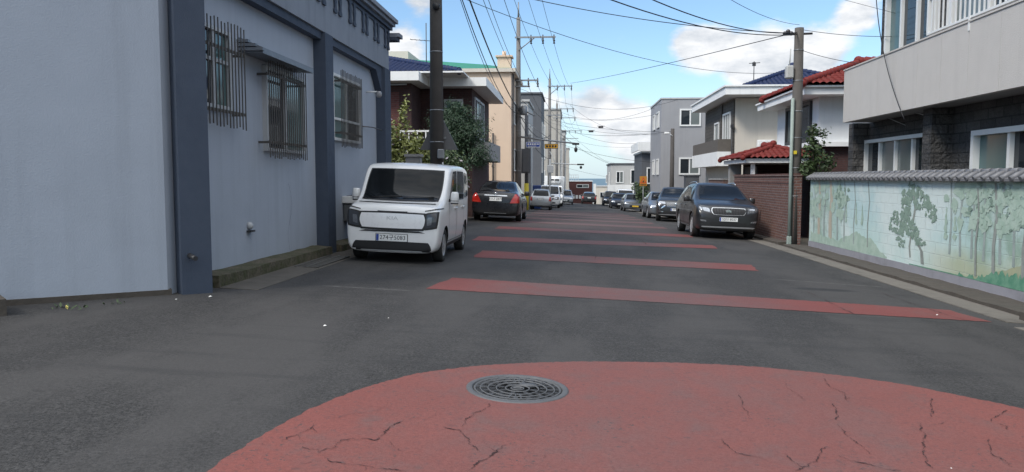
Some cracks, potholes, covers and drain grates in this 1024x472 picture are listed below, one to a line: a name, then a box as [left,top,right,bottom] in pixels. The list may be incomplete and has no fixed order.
crack [293,403,503,470]
crack [787,380,891,470]
crack [919,399,1015,467]
manhole cover [466,374,569,404]
